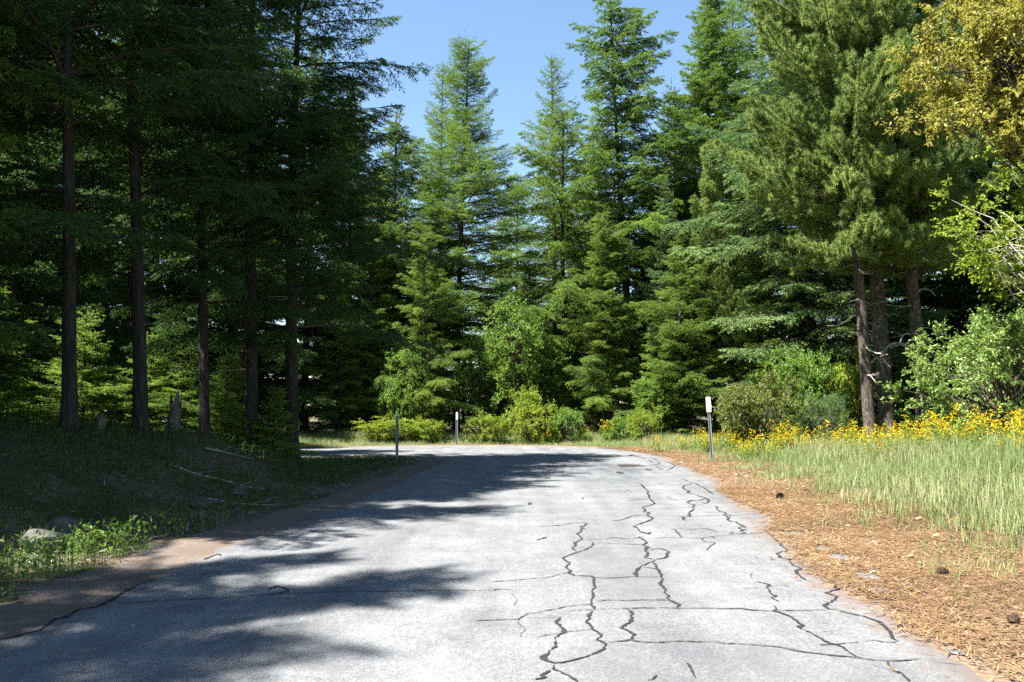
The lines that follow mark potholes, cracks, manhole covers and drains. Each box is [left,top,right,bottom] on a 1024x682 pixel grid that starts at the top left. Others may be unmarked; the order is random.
crack [4,454,919,681]
